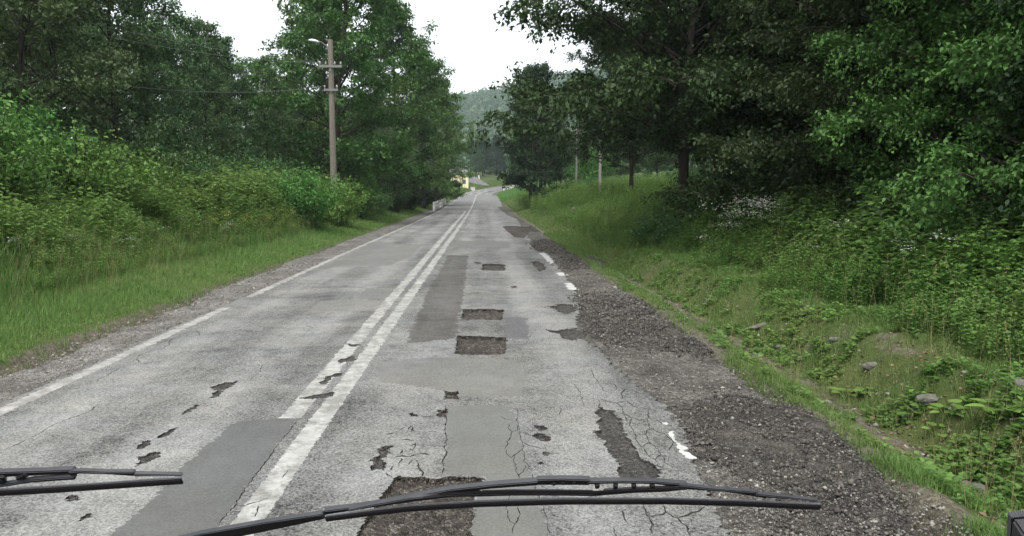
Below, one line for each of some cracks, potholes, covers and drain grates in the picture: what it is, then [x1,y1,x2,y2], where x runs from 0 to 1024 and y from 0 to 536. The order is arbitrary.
crack [504,407,550,532]
crack [559,370,674,469]
crack [613,505,707,536]
pothole [135,451,161,467]
pothole [460,309,505,320]
pothole [454,336,507,355]
pothole [370,445,394,471]
pothole [545,329,588,341]
pothole [593,407,665,478]
pothole [356,475,485,536]
crack [385,415,439,477]
pothole [503,226,530,238]
